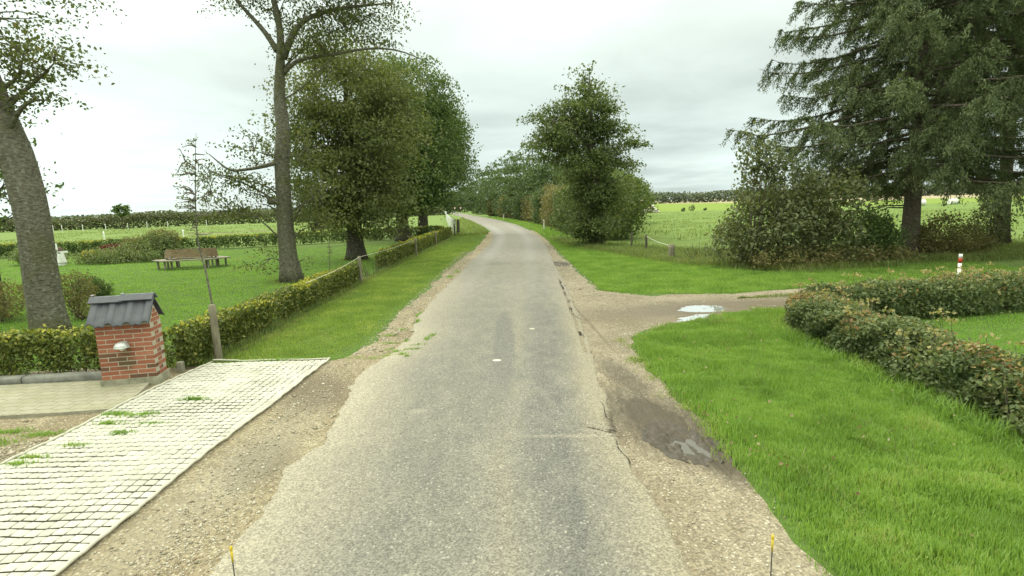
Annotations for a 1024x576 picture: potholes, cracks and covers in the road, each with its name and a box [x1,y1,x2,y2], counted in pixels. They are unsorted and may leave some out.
crack [588,402,631,465]
